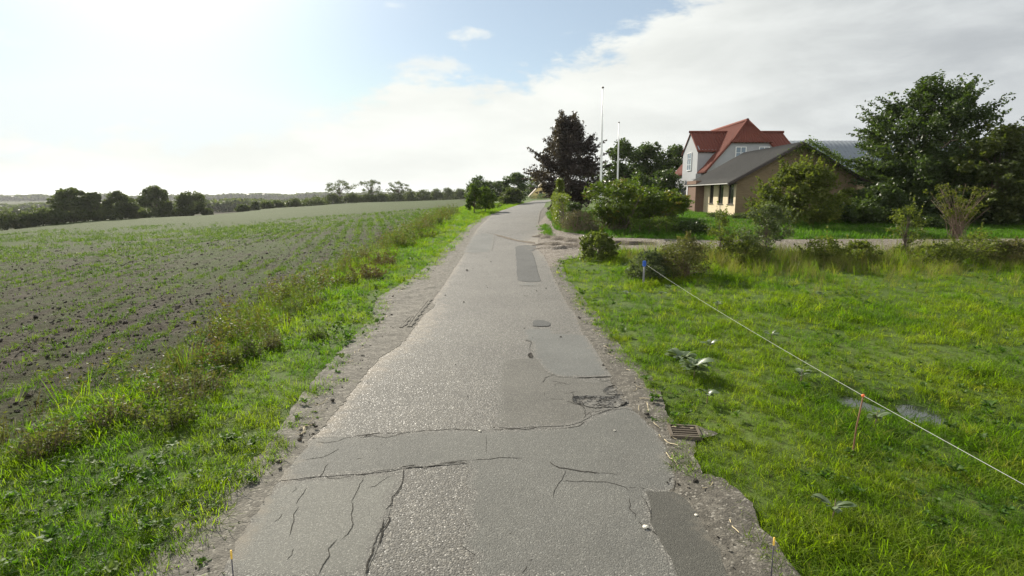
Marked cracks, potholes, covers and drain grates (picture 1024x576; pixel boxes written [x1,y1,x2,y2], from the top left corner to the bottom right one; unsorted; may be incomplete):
crack [277,427,545,574]
drain grate [667,424,703,442]
crack [550,462,657,535]
crack [544,374,633,428]
pothole [572,395,628,408]
